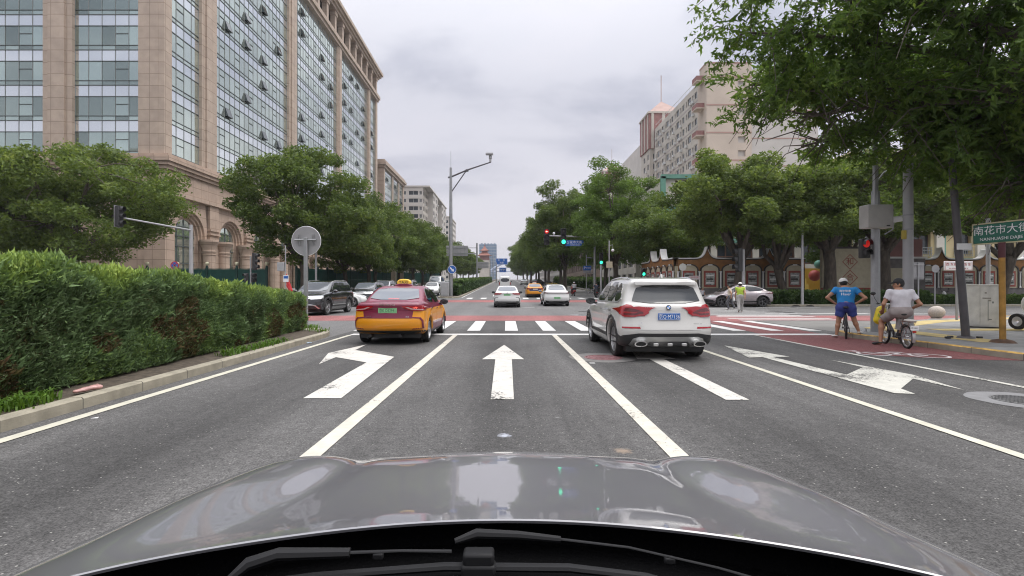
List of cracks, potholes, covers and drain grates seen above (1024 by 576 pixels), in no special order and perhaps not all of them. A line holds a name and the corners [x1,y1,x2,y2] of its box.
manhole cover [963,391,1024,408]
